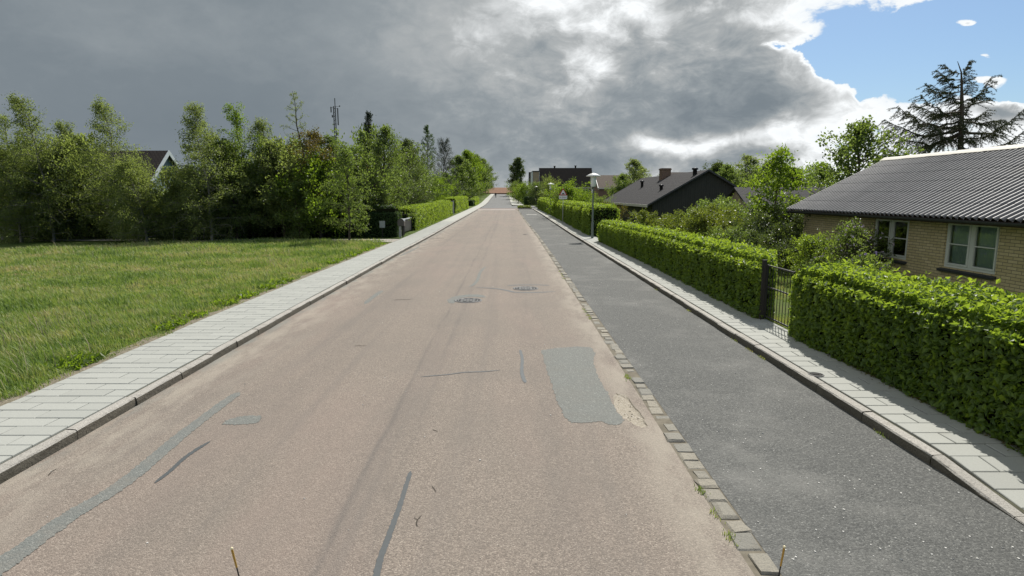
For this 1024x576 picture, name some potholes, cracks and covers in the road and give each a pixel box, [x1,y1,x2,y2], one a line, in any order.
pothole [613,393,648,428]
